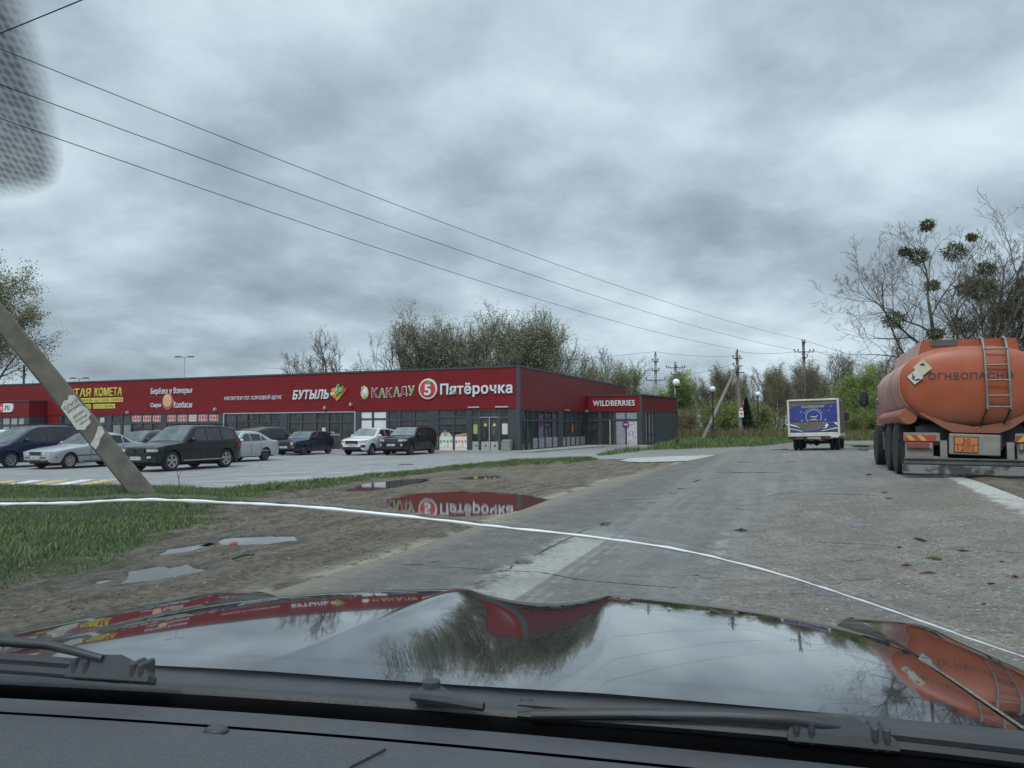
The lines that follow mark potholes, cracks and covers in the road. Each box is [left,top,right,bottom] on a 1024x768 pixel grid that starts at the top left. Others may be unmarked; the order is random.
crack [402,527,699,588]
